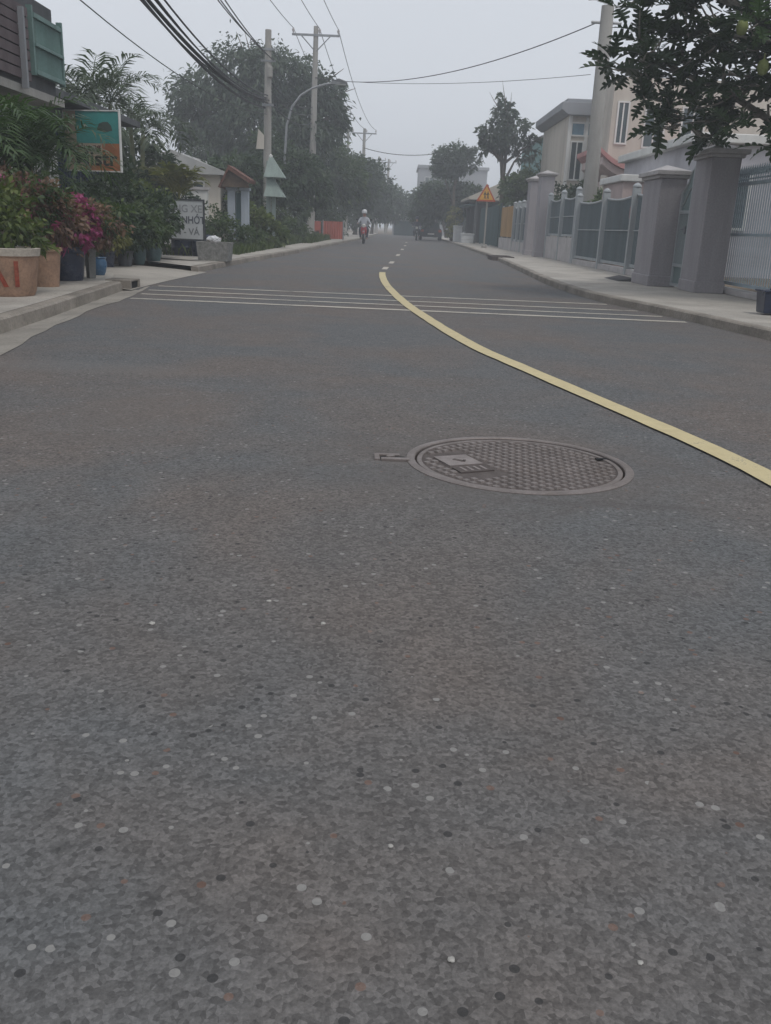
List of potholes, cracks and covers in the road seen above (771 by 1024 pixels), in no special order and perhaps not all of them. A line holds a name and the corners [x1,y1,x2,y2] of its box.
manhole cover [374,437,634,496]
